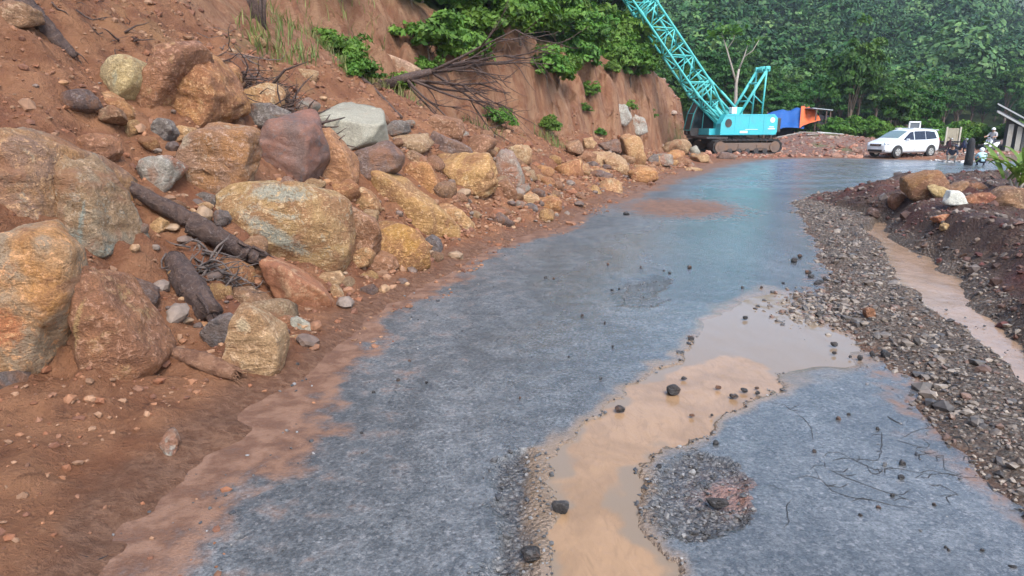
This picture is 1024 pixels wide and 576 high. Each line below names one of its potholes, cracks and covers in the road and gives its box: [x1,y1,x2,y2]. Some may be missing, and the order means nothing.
pothole [545,335,791,576]
crack [797,409,1022,512]
